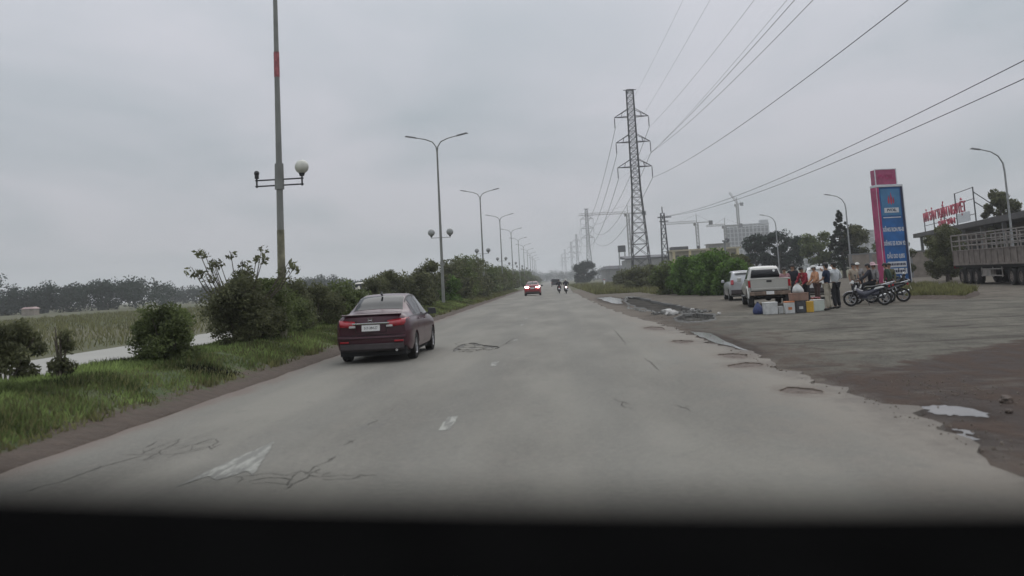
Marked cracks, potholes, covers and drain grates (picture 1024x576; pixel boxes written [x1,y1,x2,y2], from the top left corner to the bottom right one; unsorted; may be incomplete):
pothole [624,296,700,314]
crack [50,436,219,484]
pothole [778,386,826,394]
pothole [673,312,716,323]
pothole [450,342,502,353]
crack [234,420,378,488]
